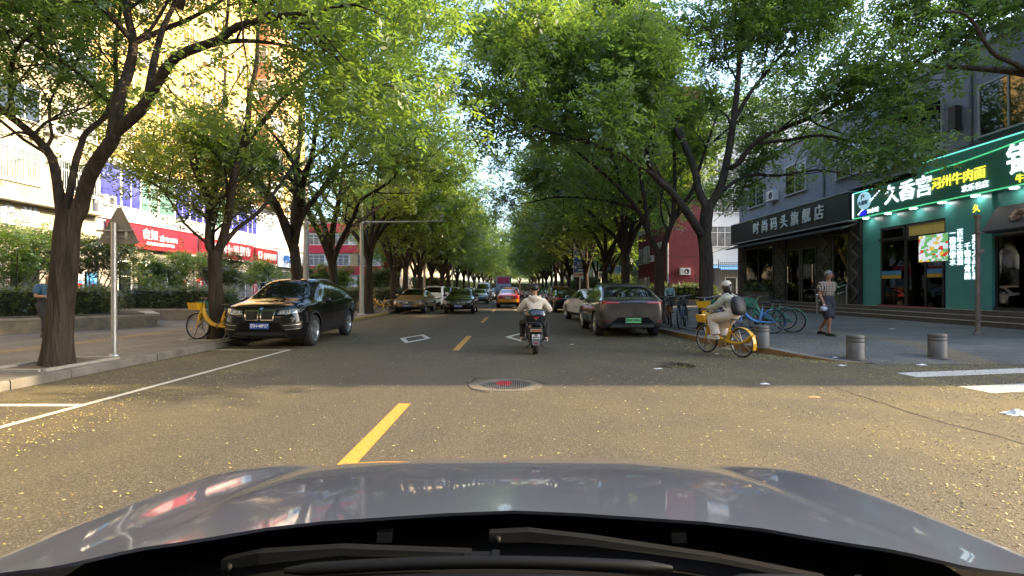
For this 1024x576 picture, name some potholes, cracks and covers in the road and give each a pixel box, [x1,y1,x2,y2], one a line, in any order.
manhole cover [468,379,542,391]
